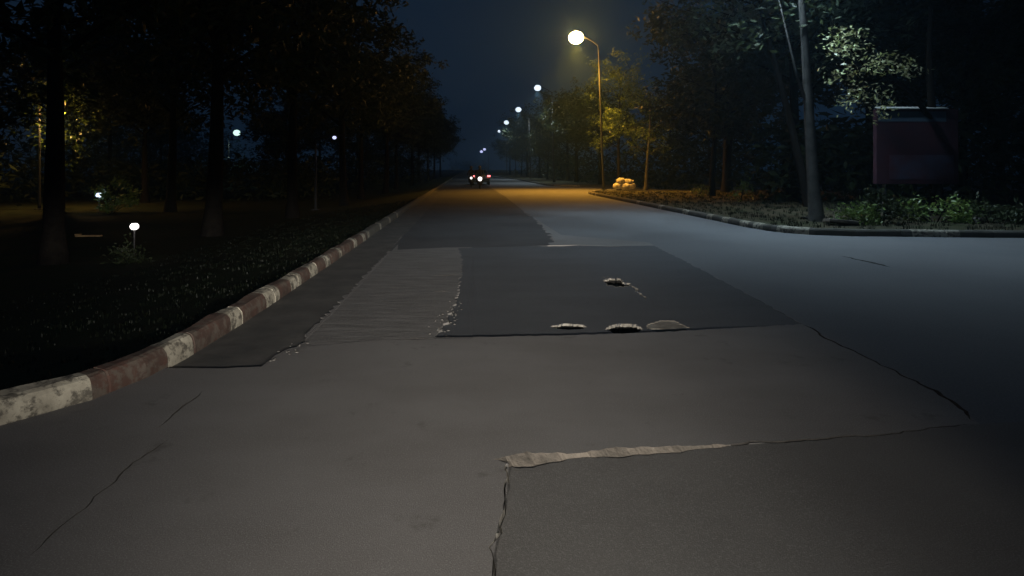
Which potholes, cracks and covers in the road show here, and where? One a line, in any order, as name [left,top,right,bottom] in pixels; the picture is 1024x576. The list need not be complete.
crack [21,393,201,560]
crack [489,326,976,576]
pothole [646,320,690,332]
pothole [606,324,642,334]
pothole [603,278,630,287]
